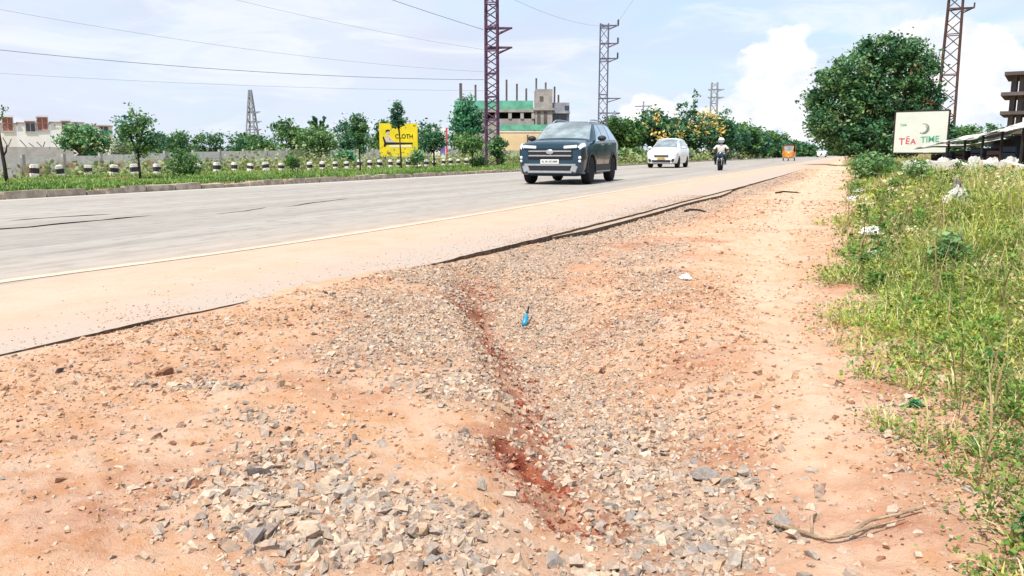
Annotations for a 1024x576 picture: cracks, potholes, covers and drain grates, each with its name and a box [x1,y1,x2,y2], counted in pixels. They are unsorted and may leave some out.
crack [0,214,142,230]
